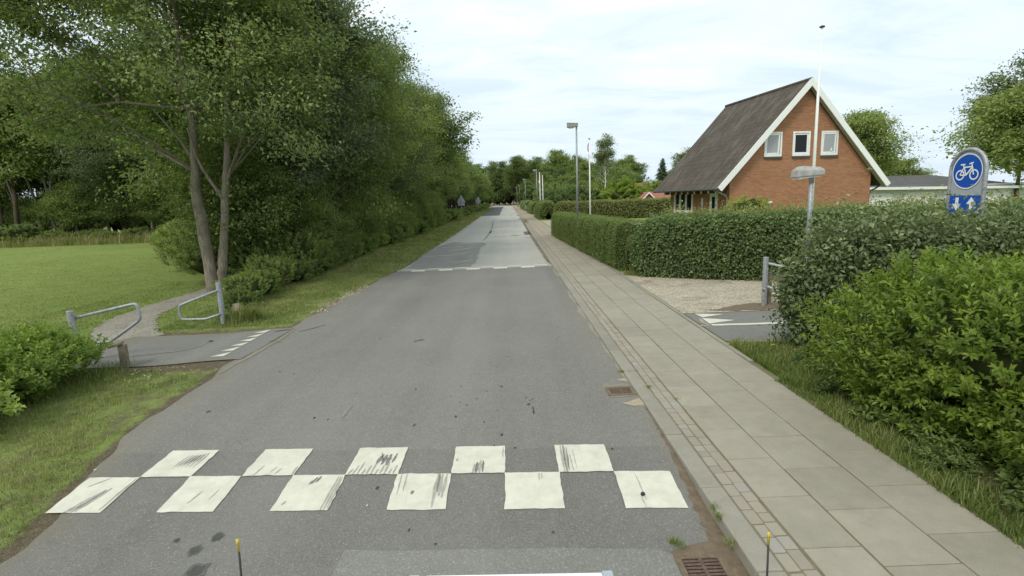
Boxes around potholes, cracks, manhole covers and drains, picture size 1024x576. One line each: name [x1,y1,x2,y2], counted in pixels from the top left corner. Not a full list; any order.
drain grate [673,553,734,576]
drain grate [605,386,637,396]
